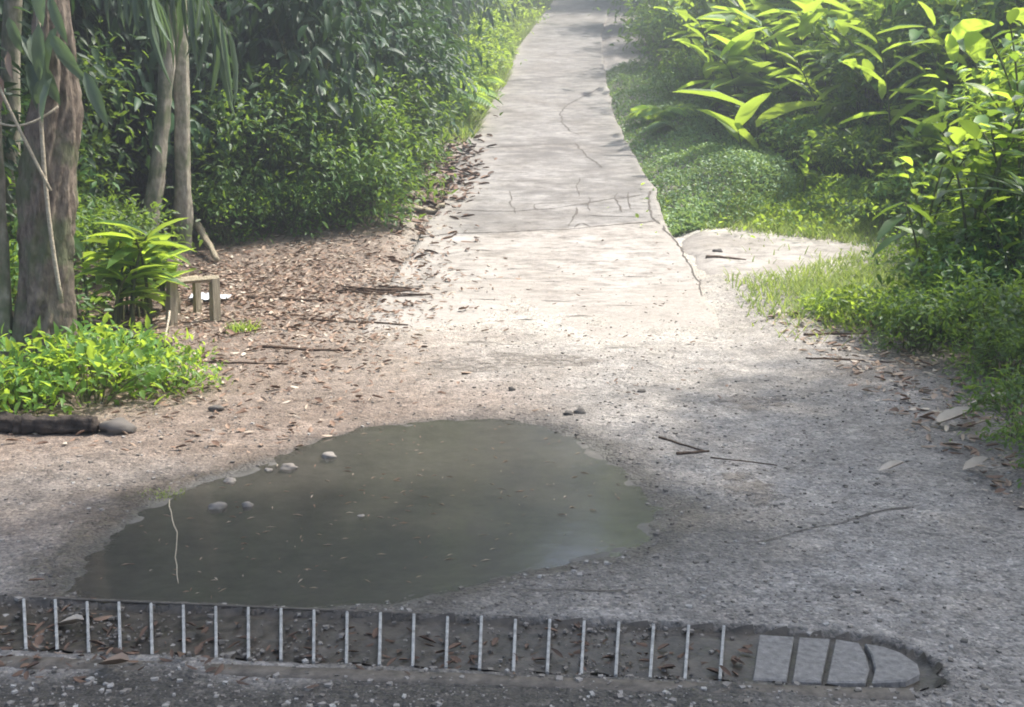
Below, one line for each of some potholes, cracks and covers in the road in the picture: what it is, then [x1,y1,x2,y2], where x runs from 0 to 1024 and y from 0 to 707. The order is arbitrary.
crack [741,505,918,544]
pothole [76,421,651,606]
crack [448,74,703,296]
